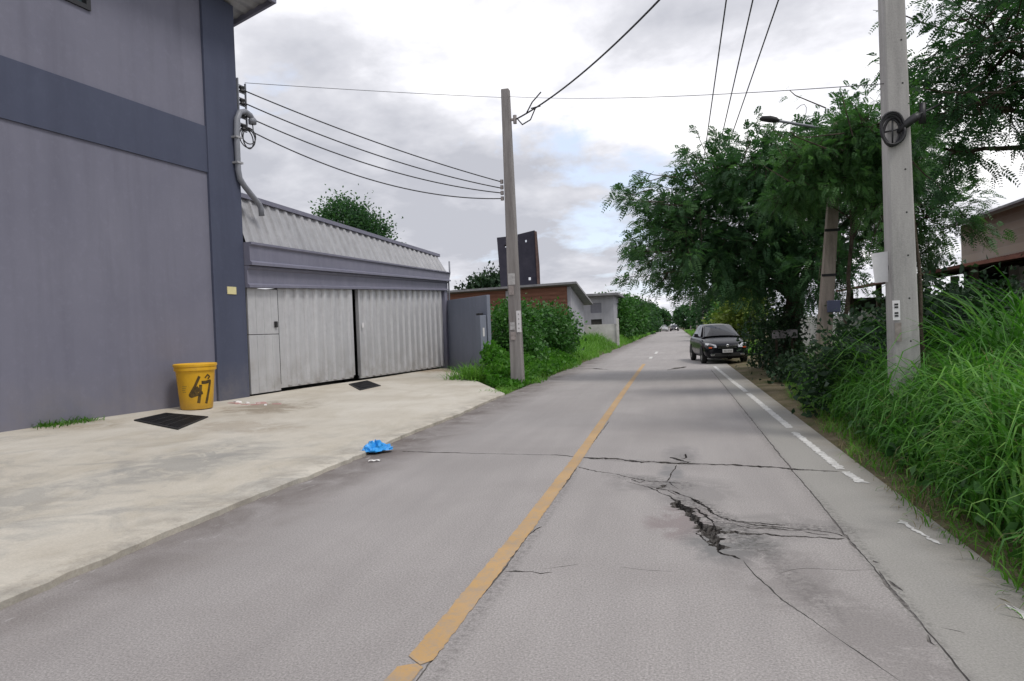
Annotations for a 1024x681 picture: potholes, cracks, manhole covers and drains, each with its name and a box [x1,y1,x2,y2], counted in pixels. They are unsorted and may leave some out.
crack [402,370,970,681]
